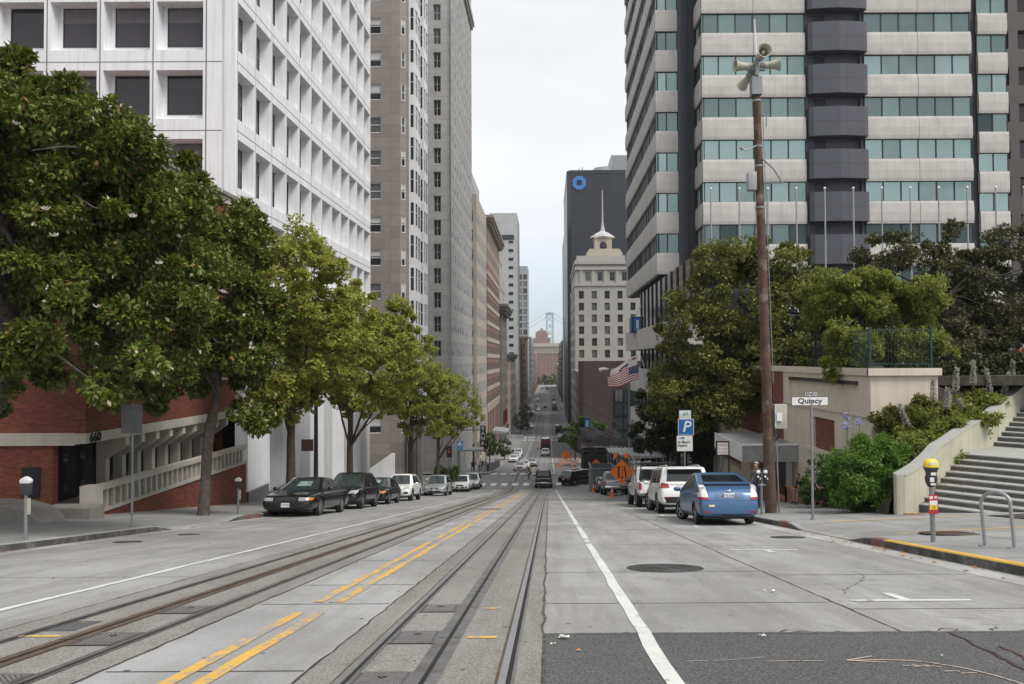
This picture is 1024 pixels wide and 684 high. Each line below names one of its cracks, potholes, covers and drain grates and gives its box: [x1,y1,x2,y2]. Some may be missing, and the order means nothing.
manhole cover [627,564,704,573]
utility cover [159,605,215,613]
